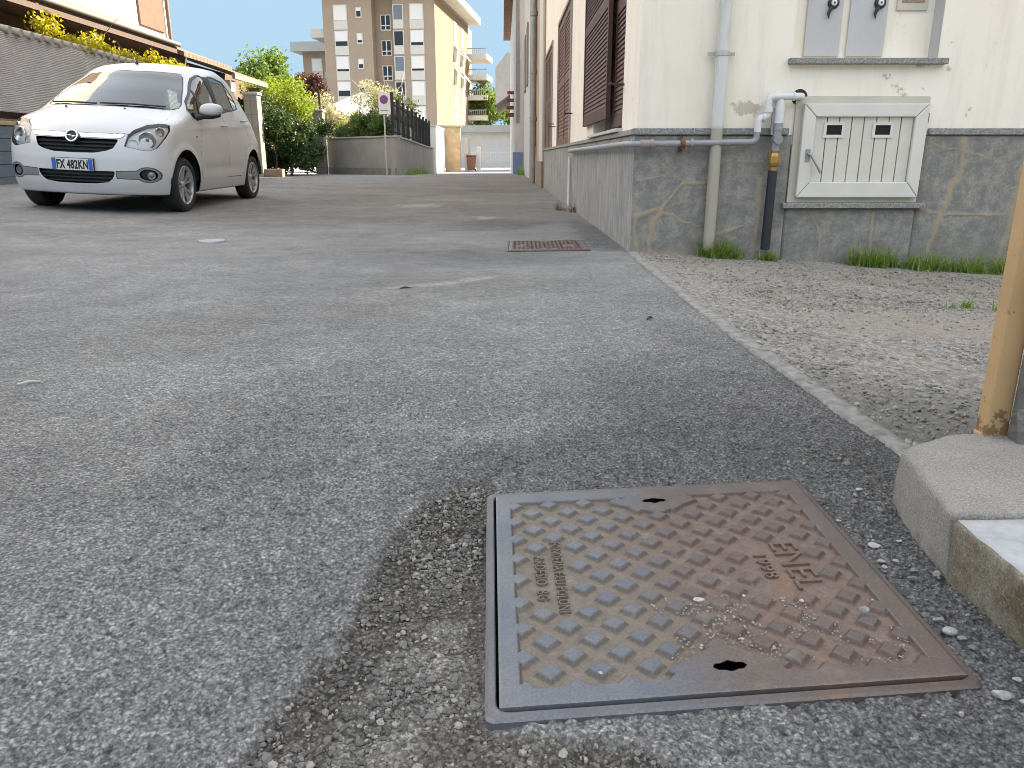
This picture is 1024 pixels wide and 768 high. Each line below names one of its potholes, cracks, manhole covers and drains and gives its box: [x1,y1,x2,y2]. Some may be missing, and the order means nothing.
manhole cover [485,480,982,731]
